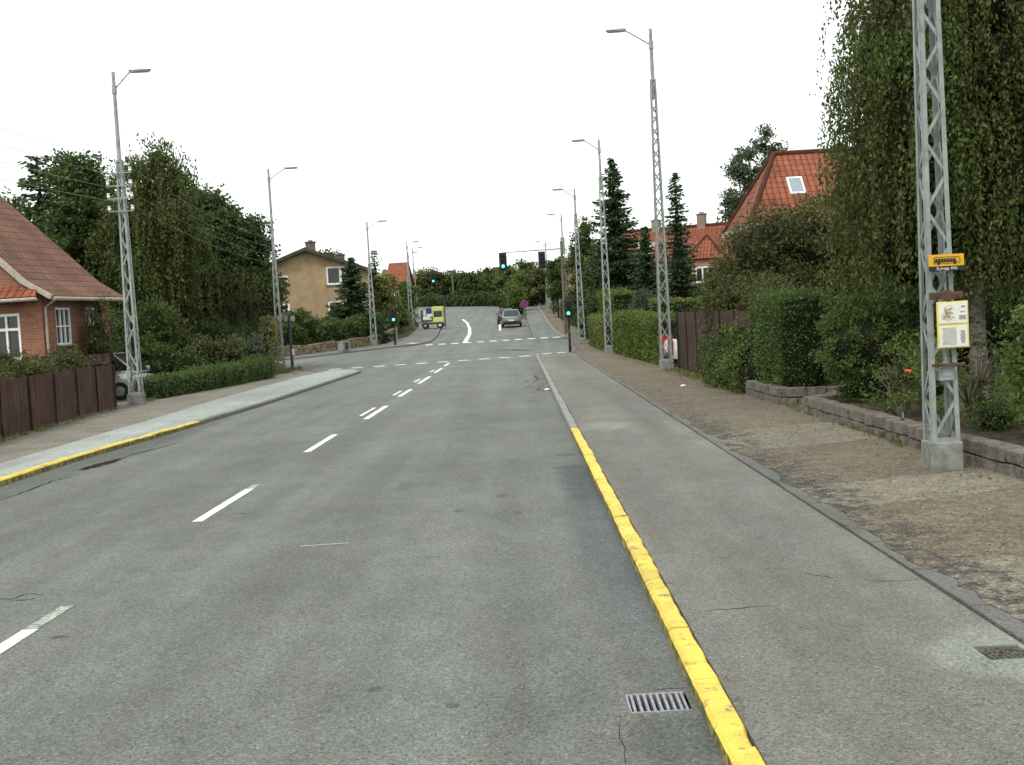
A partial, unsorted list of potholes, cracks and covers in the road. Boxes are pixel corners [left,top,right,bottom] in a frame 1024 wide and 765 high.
drain grate [625,691,692,713]
crack [2,476,74,500]
